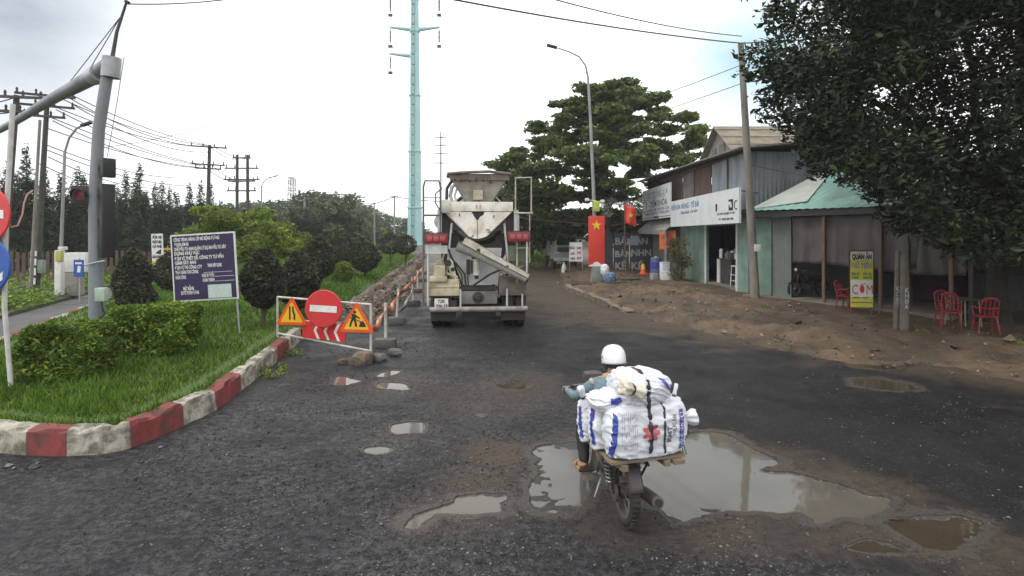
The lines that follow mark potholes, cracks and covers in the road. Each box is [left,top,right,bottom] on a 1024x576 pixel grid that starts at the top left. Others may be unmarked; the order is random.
pothole [388,420,430,435]
pothole [493,379,534,390]
pothole [374,369,403,377]
pothole [360,444,396,456]
pothole [374,381,411,391]
pothole [841,536,911,558]
pothole [869,501,1007,565]
pothole [328,375,362,386]
pothole [842,376,930,393]
pothole [386,486,520,537]
